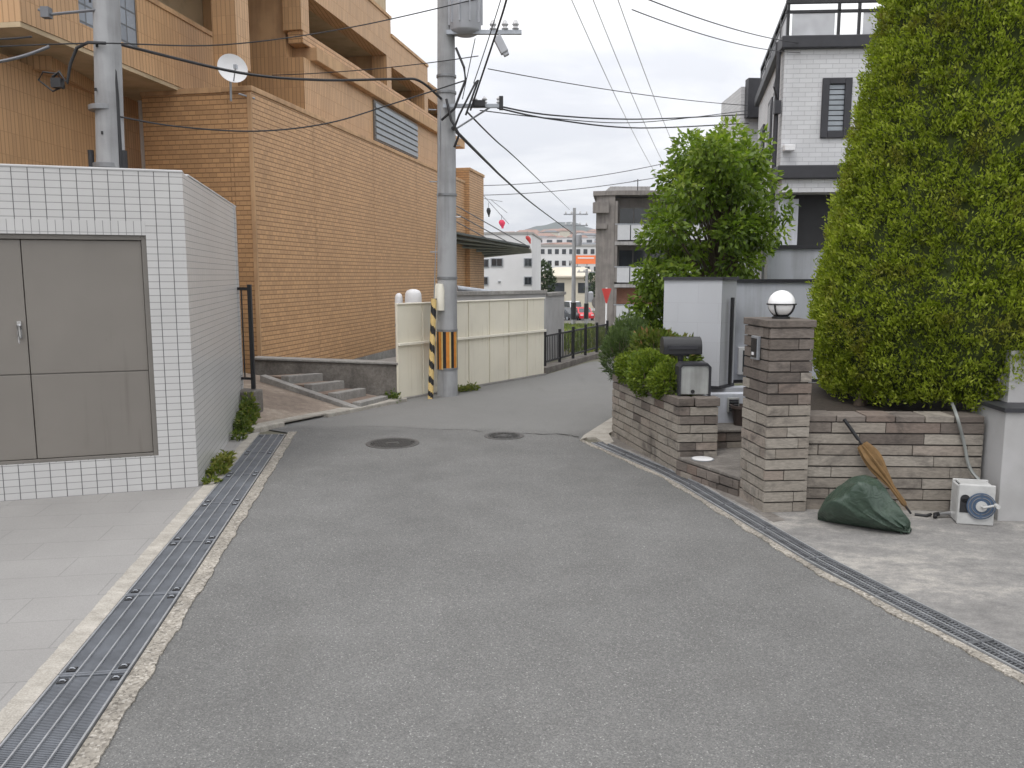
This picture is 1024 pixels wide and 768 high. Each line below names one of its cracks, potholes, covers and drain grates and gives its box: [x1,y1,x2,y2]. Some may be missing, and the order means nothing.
drain grate [805,556,898,597]
drain grate [755,527,827,560]
drain grate [618,453,665,469]
drain grate [649,467,699,485]
drain grate [715,503,776,530]
manhole cover [484,432,524,440]
drain grate [875,592,993,645]
manhole cover [366,438,419,449]
drain grate [967,639,1024,674]
drain grate [682,483,734,505]
